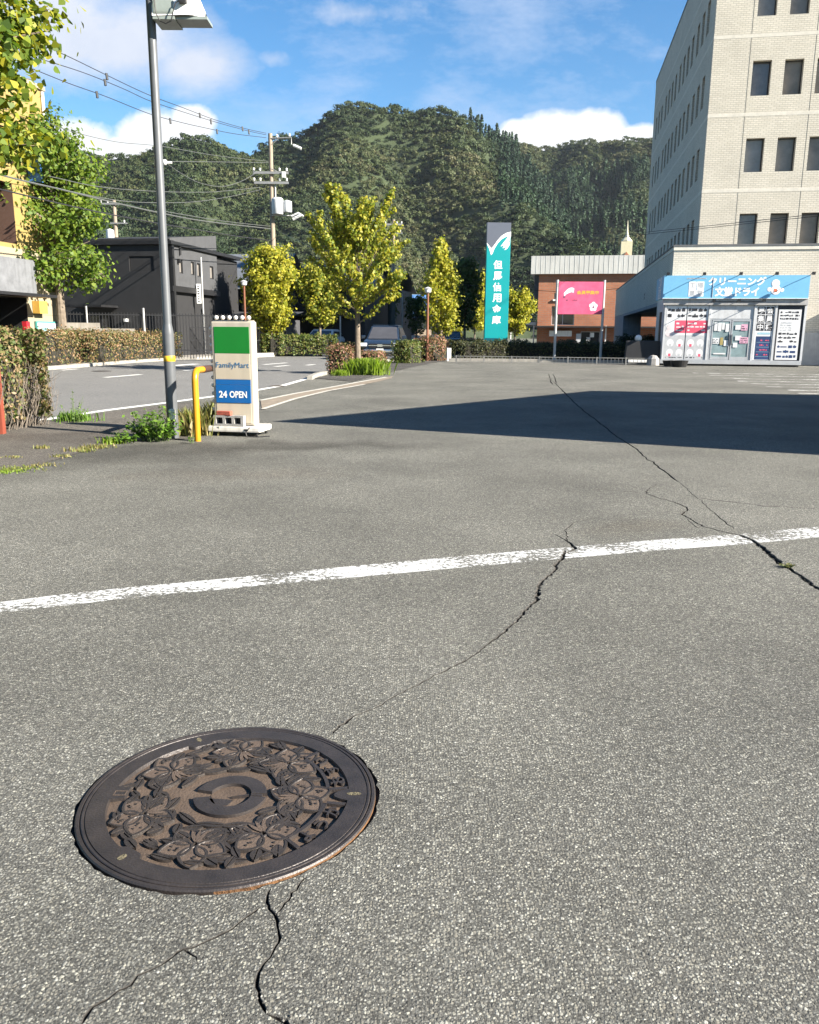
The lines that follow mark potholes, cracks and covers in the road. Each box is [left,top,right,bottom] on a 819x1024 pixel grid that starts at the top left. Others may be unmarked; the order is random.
crack [332,517,598,735]
crack [81,877,307,1024]
manhole cover [70,727,380,898]
crack [549,374,819,590]
